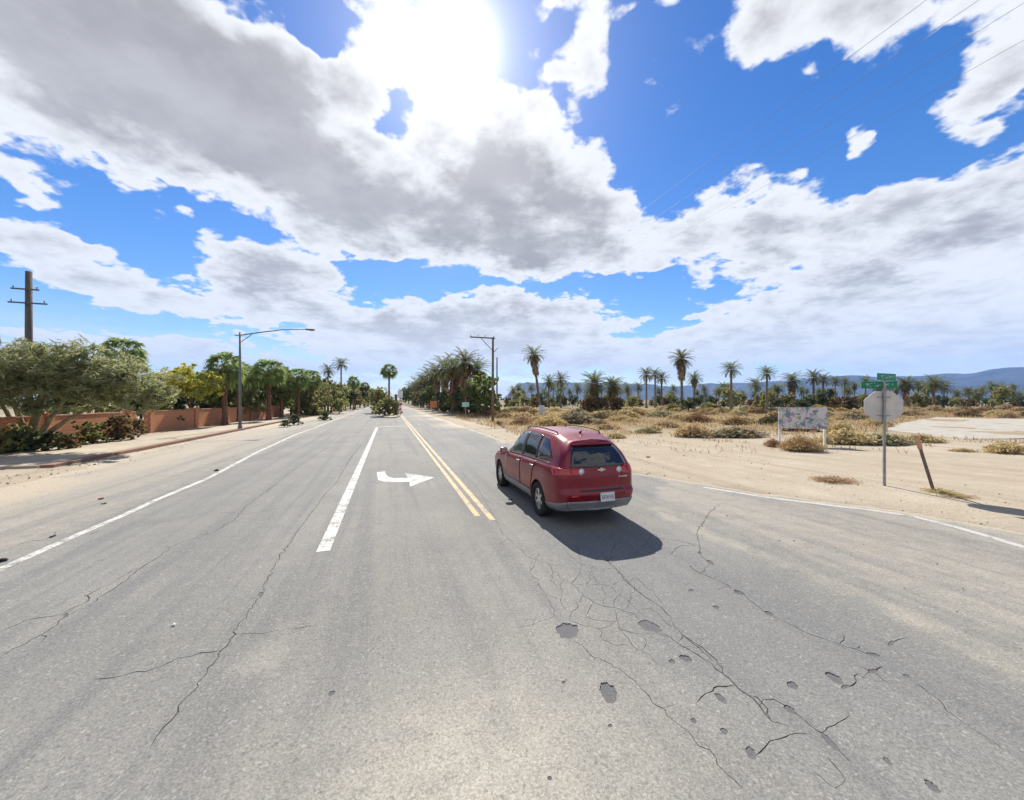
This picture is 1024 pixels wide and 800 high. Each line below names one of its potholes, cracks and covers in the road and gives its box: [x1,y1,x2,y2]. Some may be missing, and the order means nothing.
pothole [924,779,941,793]
crack [466,477,850,788]
pothole [556,623,579,639]
pothole [599,682,617,704]
pothole [638,620,662,633]
crack [843,665,887,690]
pothole [825,672,844,685]
pothole [819,731,840,751]
crack [1,449,358,744]
